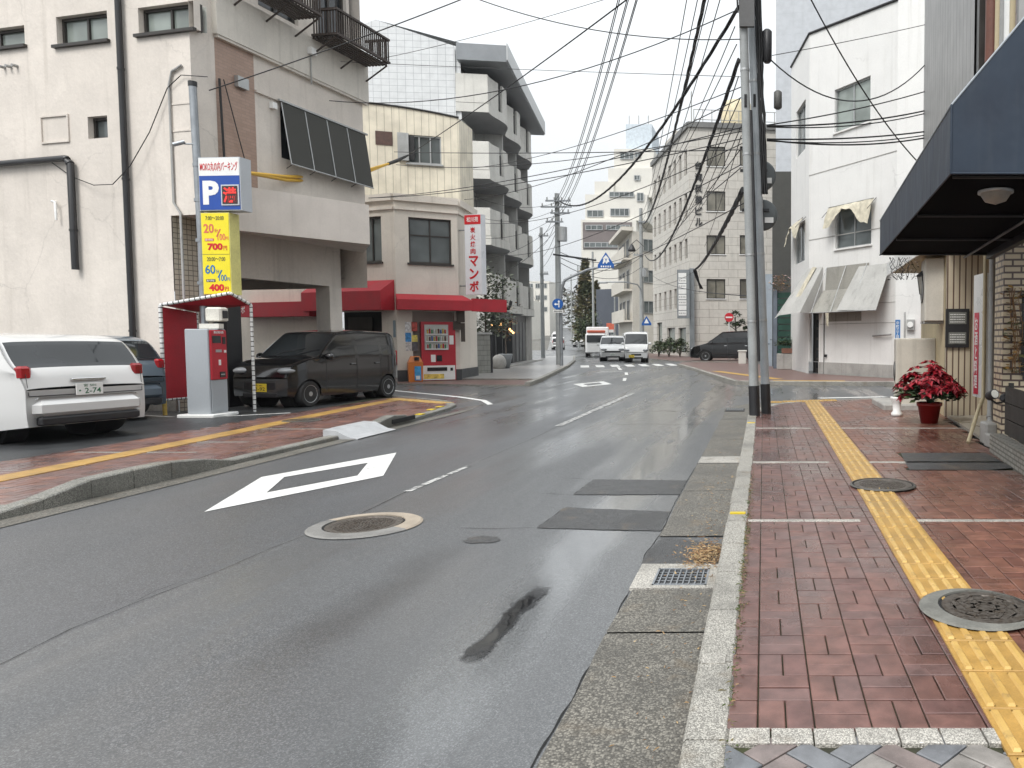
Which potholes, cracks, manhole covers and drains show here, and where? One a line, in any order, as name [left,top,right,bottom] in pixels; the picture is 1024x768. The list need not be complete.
manhole cover [919,588,1024,631]
manhole cover [850,478,916,493]
drain grate [629,564,718,591]
manhole cover [304,512,423,539]
